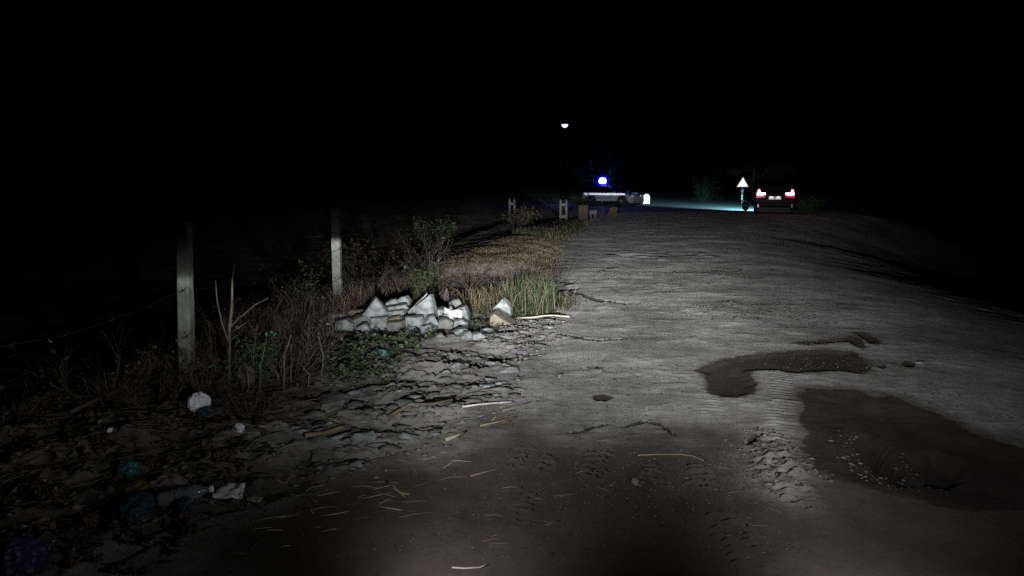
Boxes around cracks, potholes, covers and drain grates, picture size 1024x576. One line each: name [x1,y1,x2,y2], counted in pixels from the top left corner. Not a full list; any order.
crack [563,421,676,436]
pothole [855,332,880,344]
pothole [692,349,872,398]
pothole [792,336,866,349]
crack [567,291,626,304]
crack [550,332,630,342]
pothole [796,388,1024,512]
